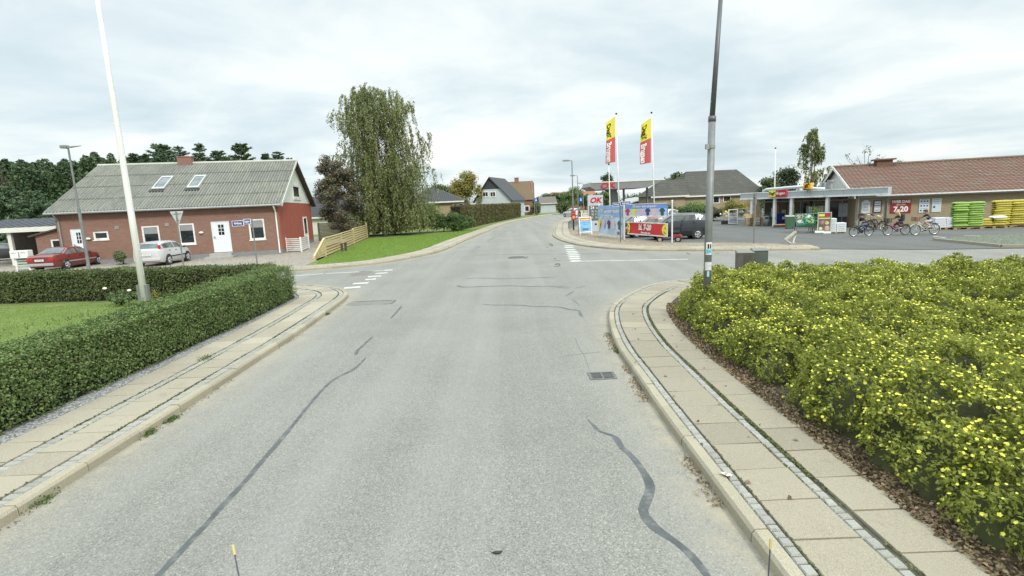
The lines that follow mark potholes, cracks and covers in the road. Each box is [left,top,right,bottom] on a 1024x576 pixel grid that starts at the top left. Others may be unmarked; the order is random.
drain grate [587,371,618,380]
